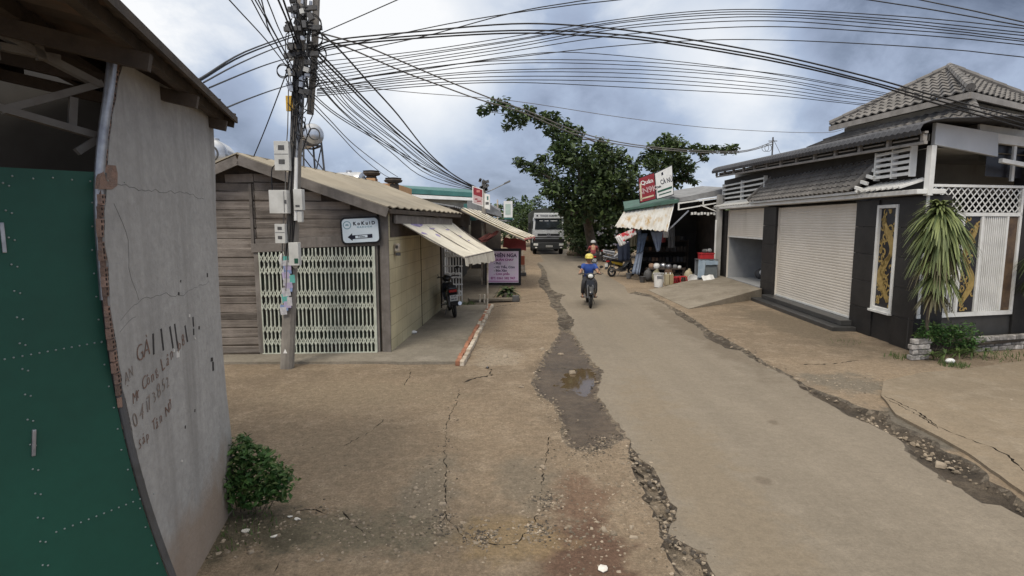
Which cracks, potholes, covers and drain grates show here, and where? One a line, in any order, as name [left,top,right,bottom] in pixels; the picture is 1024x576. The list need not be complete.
pothole [537,262,575,331]
crack [886,397,1024,471]
crack [443,367,552,545]
pothole [531,330,629,452]
